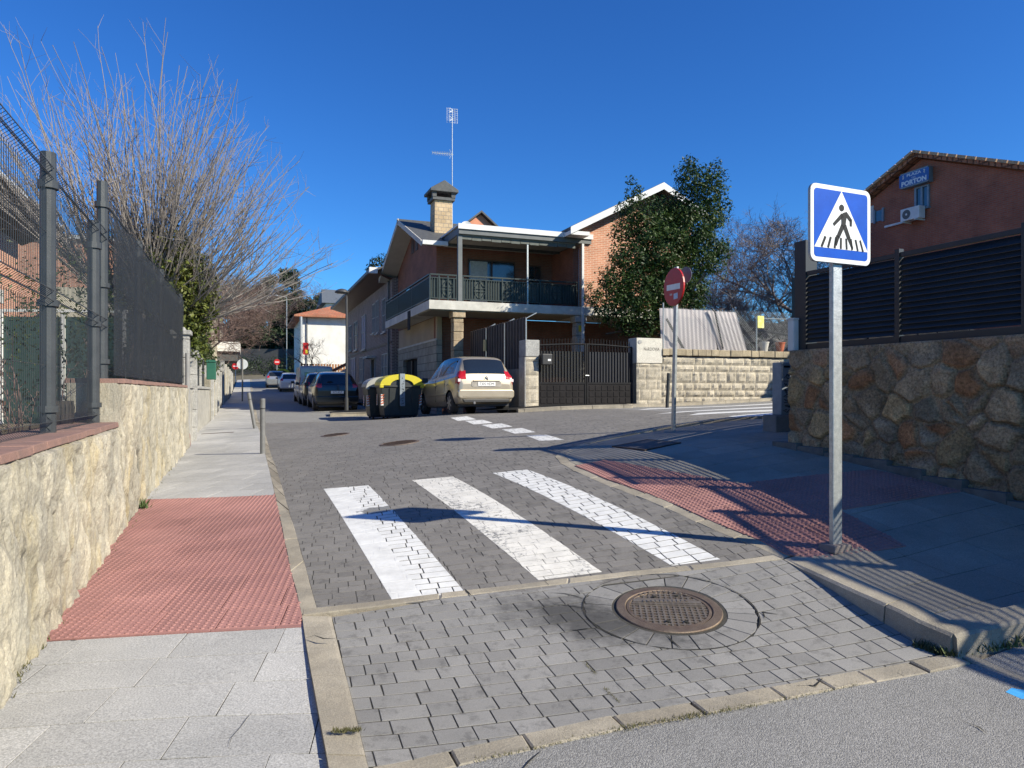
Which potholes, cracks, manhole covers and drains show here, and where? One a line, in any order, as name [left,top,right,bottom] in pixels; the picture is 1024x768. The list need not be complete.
manhole cover [616,587,723,634]
